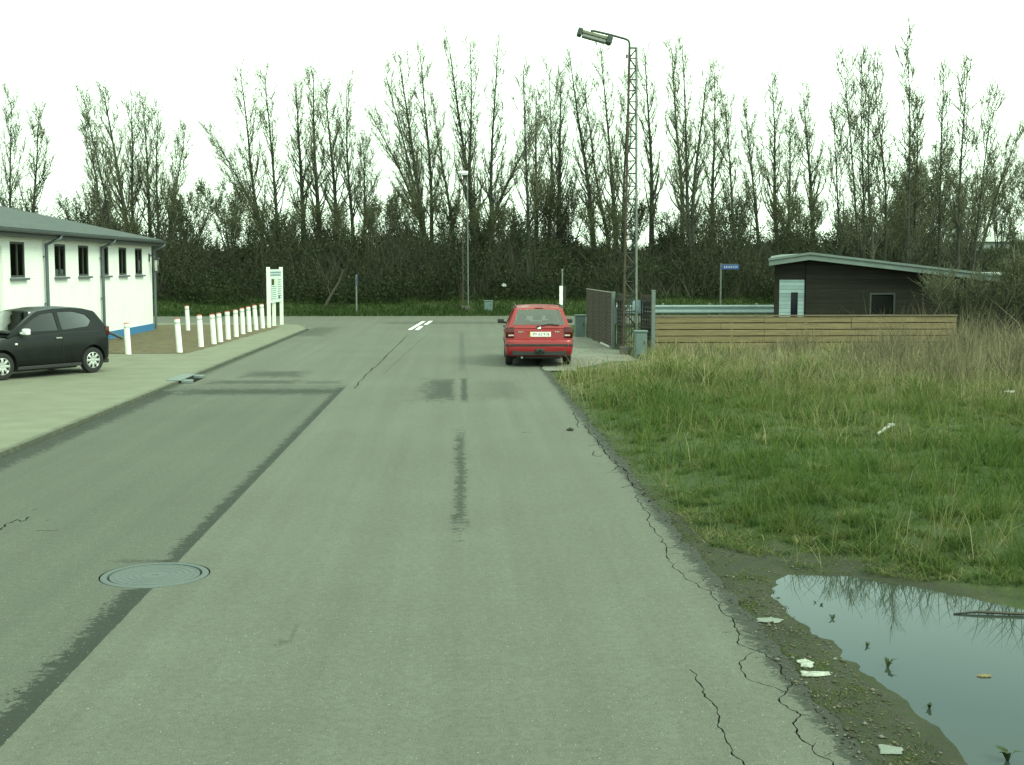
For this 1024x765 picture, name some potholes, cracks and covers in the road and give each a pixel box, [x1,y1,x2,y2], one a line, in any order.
crack [635,495,845,765]
crack [573,412,637,489]
manhole cover [99,562,210,588]
drain grate [166,374,205,383]
